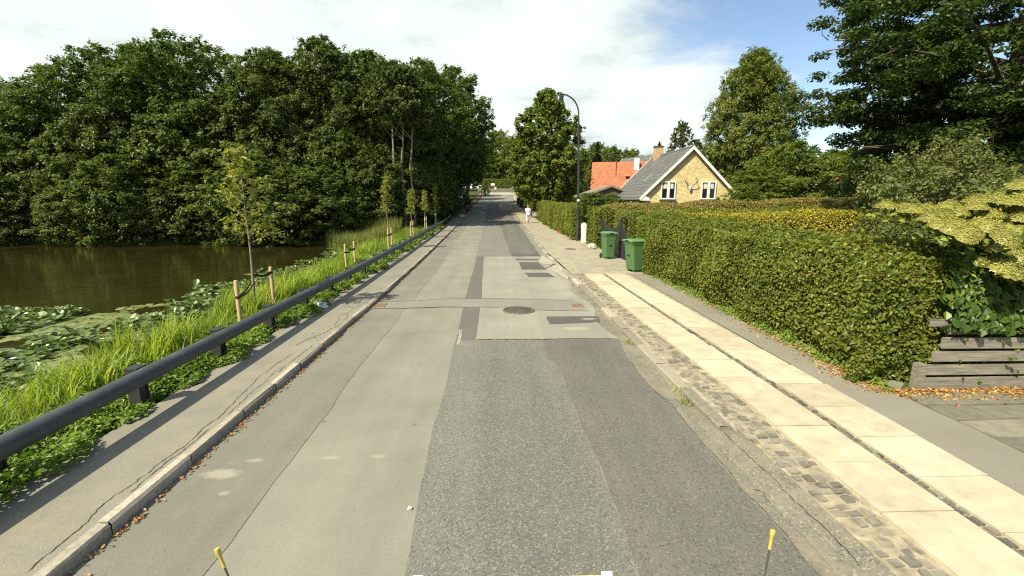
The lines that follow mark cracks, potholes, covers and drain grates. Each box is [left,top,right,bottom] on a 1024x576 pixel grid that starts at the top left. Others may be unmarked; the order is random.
manhole cover [502,306,535,314]
